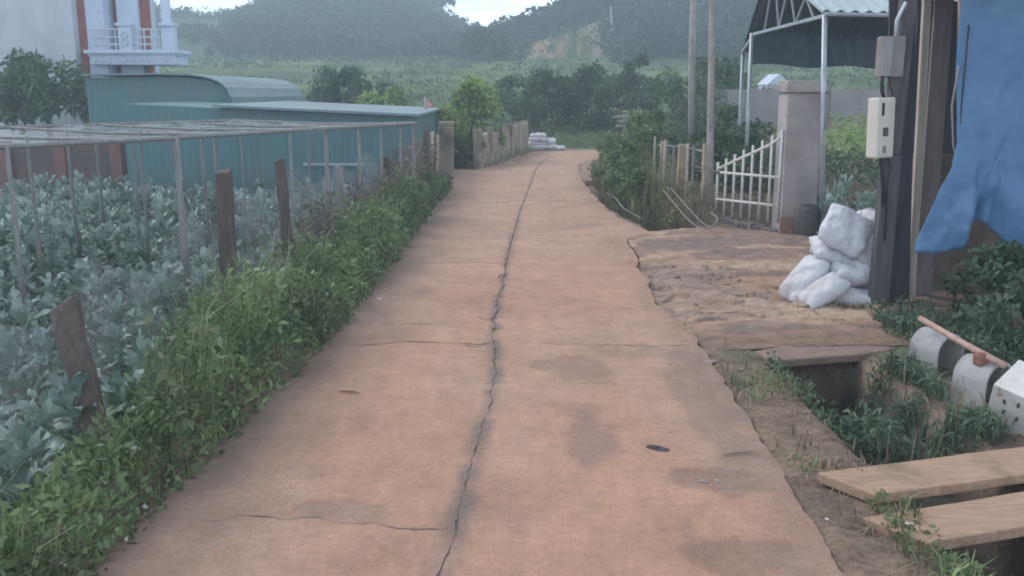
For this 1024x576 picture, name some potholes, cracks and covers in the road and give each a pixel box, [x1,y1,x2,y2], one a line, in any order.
crack [213,156,552,576]
